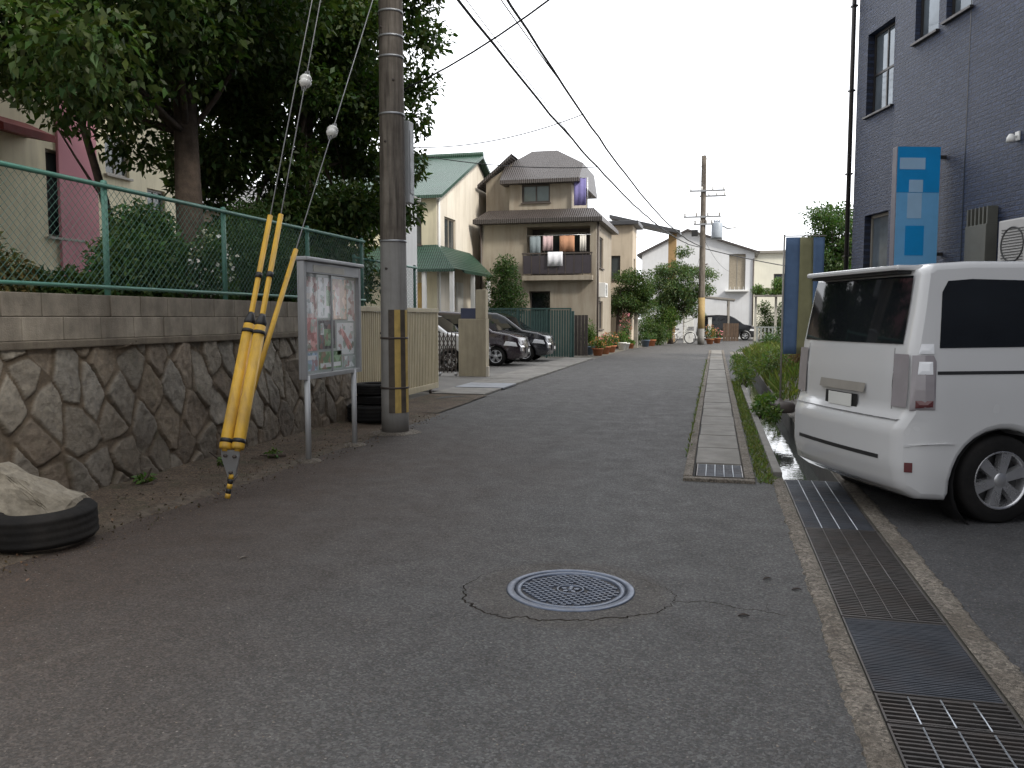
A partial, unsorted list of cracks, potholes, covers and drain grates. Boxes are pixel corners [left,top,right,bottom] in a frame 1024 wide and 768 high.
drain grate [874,693,1024,738]
drain grate [784,479,855,504]
crack [461,564,781,622]
drain grate [804,527,946,625]
drain grate [793,500,877,532]
drain grate [887,723,1024,768]
drain grate [842,616,1007,706]
drain grate [696,464,743,479]
manhole cover [506,569,635,612]
